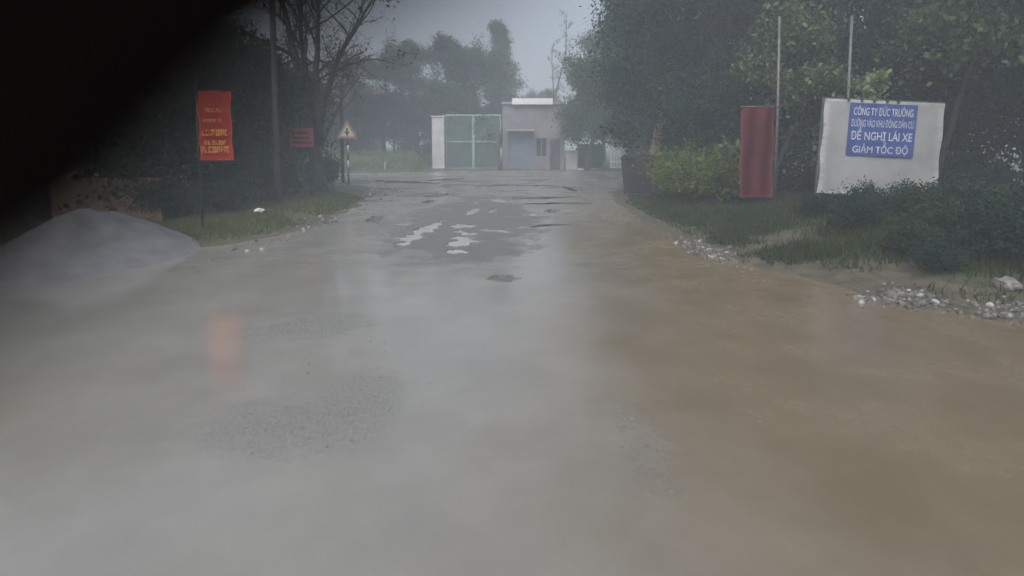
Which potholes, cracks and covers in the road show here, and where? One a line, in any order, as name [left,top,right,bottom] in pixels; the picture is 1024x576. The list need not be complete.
crack [374,178,592,204]
pothole [486,274,523,282]
pothole [443,236,481,247]
pothole [393,219,446,248]
